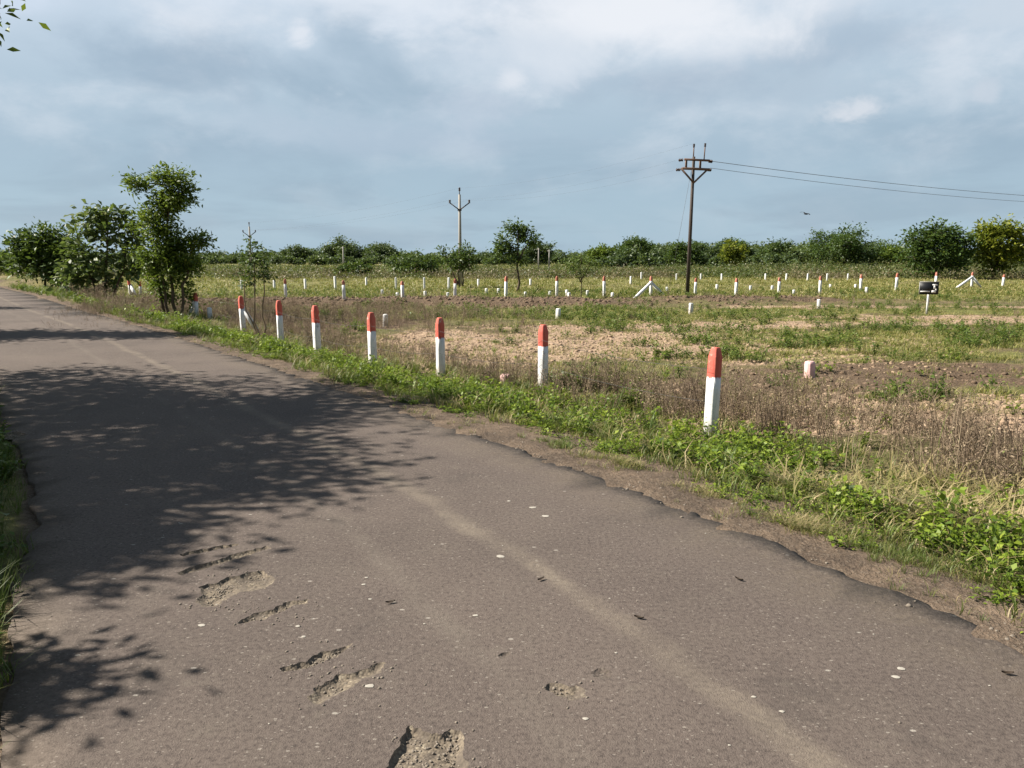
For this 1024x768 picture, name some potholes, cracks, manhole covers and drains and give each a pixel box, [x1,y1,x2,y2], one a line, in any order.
pothole [386,725,469,768]
pothole [195,570,276,607]
pothole [307,662,385,704]
pothole [545,683,586,700]
pothole [280,643,353,672]
pothole [237,599,309,625]
